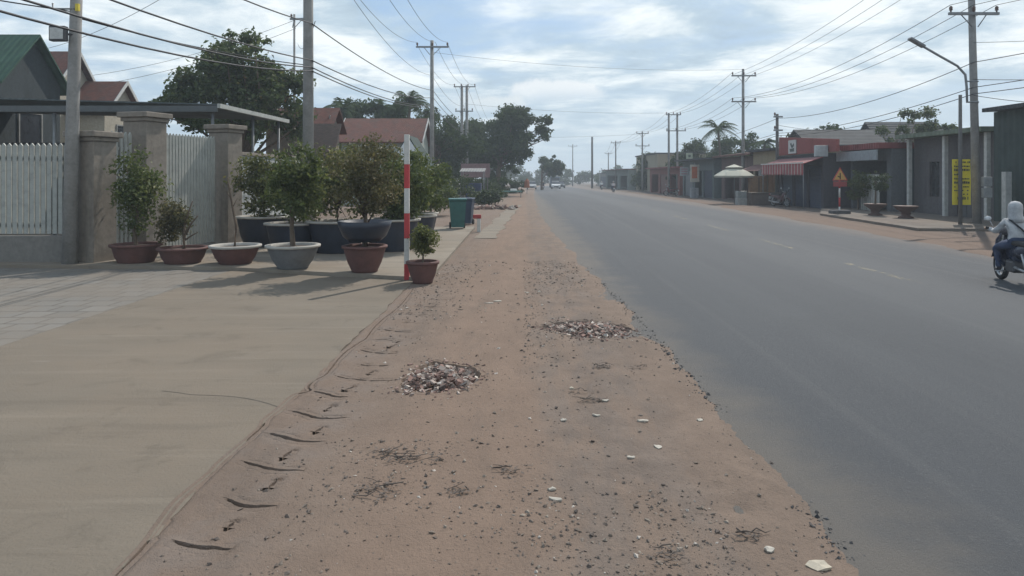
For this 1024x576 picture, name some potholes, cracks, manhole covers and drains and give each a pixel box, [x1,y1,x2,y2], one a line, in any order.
pothole [523,318,648,342]
pothole [384,358,498,399]
